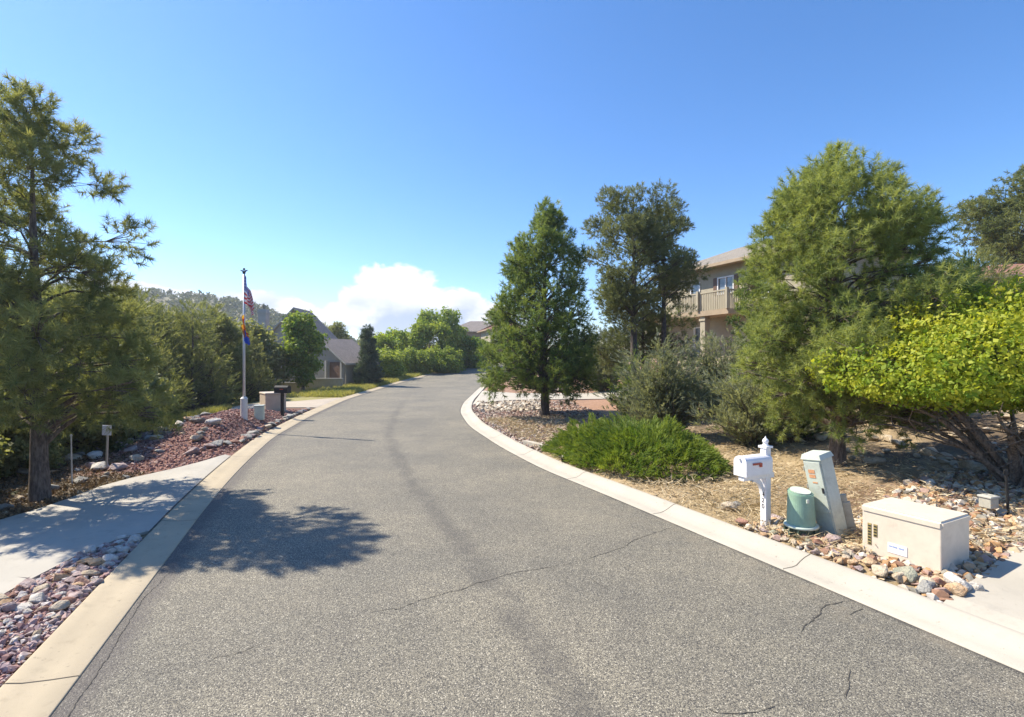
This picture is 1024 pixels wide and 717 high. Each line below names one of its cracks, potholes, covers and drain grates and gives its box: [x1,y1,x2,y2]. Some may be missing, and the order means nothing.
crack [706,670,851,714]
crack [802,601,861,631]
